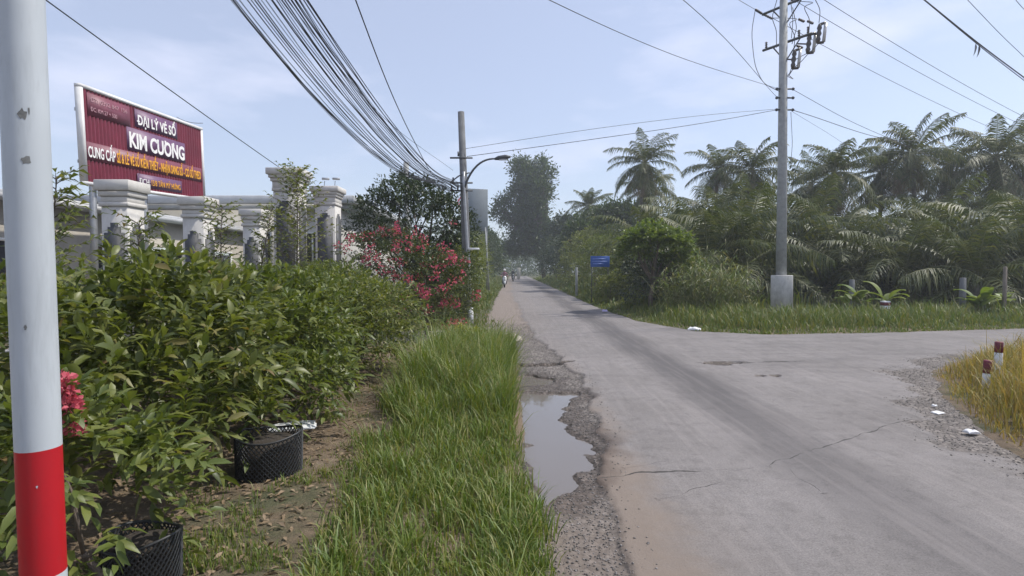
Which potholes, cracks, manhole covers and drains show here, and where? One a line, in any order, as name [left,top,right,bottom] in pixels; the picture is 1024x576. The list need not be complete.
pothole [518,360,576,368]
pothole [519,390,603,507]
pothole [519,374,556,387]
crack [595,418,920,501]
